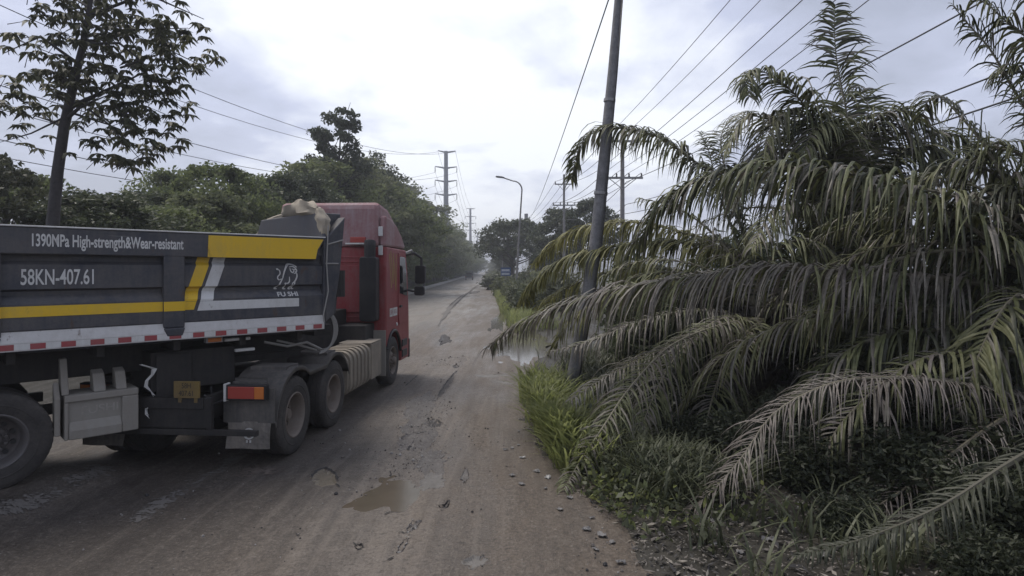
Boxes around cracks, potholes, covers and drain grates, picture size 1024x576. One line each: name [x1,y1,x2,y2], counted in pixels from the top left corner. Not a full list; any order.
pothole [461,554,491,570]
pothole [310,469,337,487]
pothole [396,410,440,453]
